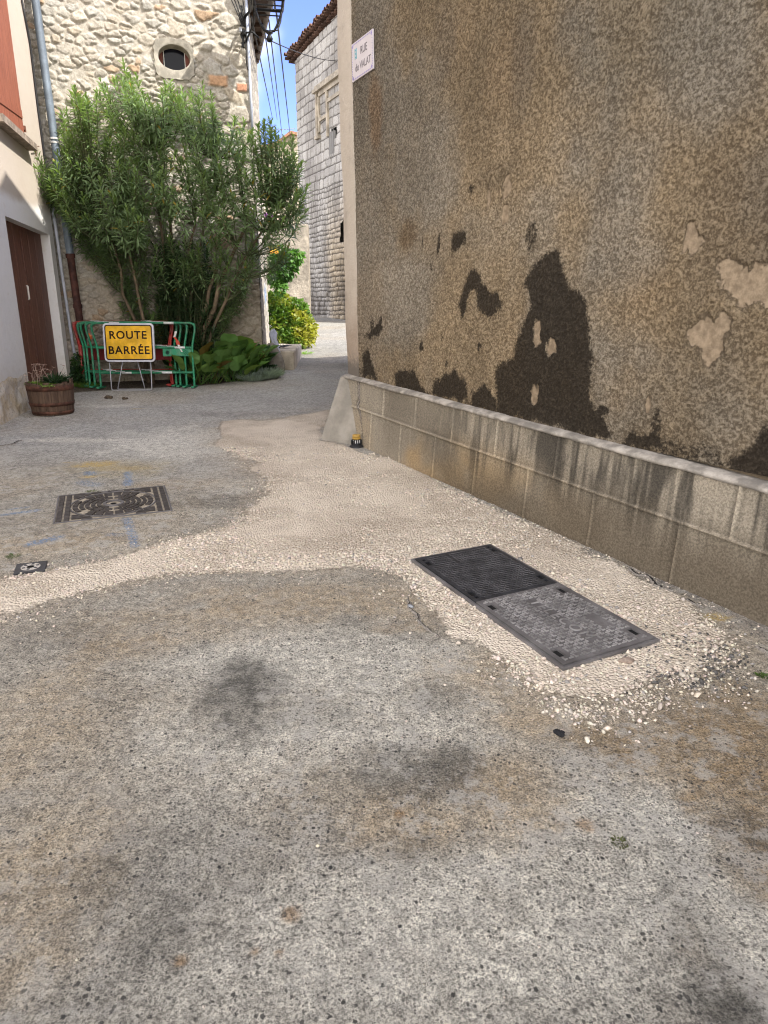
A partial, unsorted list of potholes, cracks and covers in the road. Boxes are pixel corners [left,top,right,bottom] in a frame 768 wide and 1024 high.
manhole cover [415,544,557,603]
manhole cover [53,485,173,525]
crack [406,596,450,642]
utility cover [13,561,48,575]
manhole cover [476,583,654,666]
